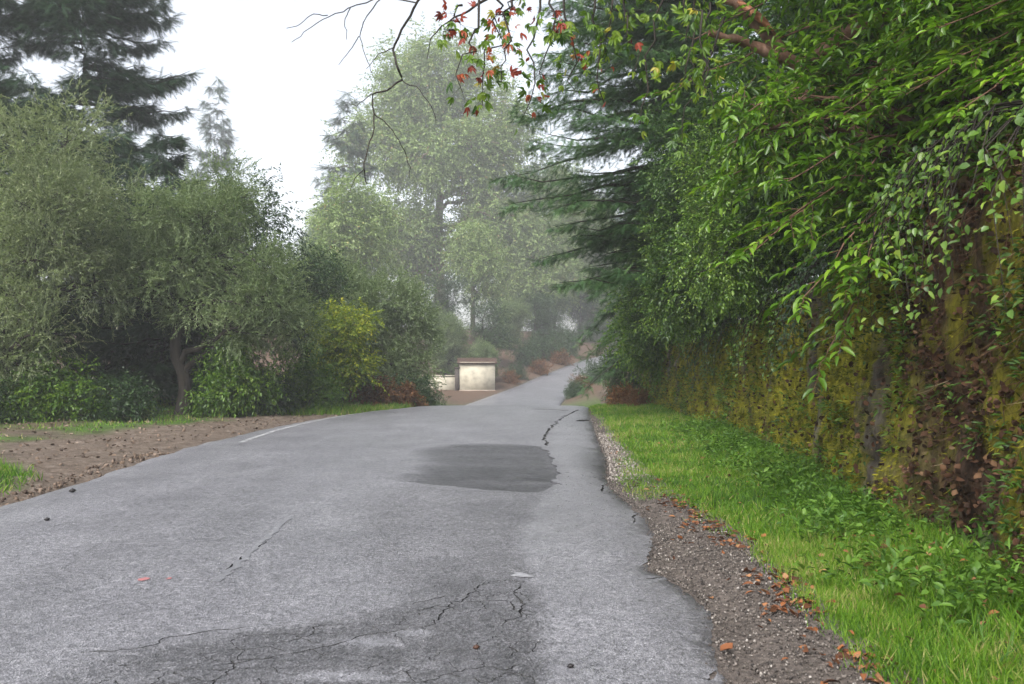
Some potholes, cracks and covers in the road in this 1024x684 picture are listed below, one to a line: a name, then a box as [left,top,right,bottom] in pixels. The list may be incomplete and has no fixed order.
crack [542,409,589,446]
crack [94,580,539,684]
